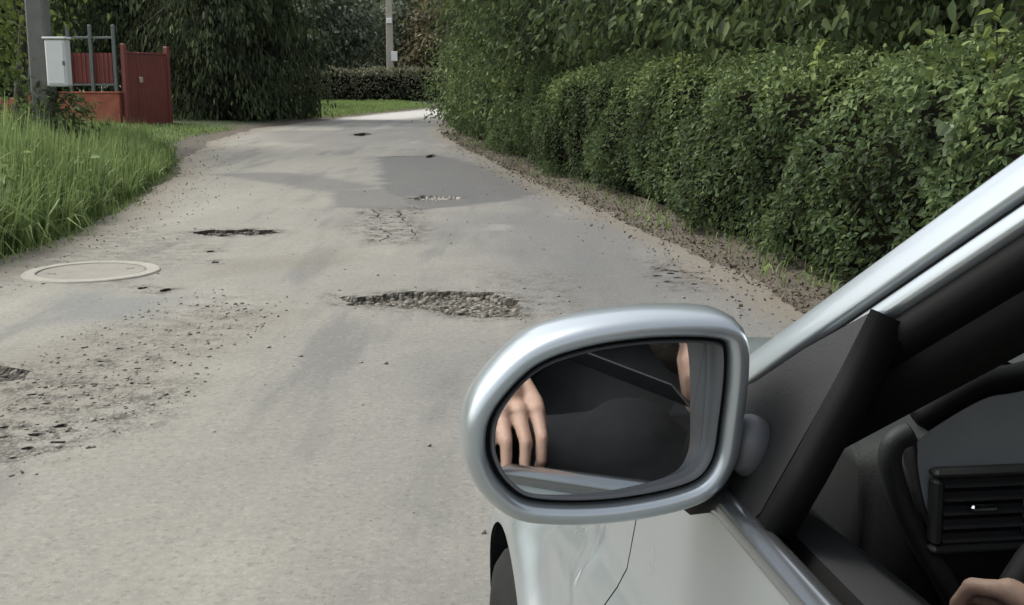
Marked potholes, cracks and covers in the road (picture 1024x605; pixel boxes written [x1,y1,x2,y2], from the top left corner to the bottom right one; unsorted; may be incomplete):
pothole [0,366,30,382]
manhole cover [20,261,161,284]
crack [361,207,418,242]
pothole [191,229,281,237]
pothole [337,291,524,318]
